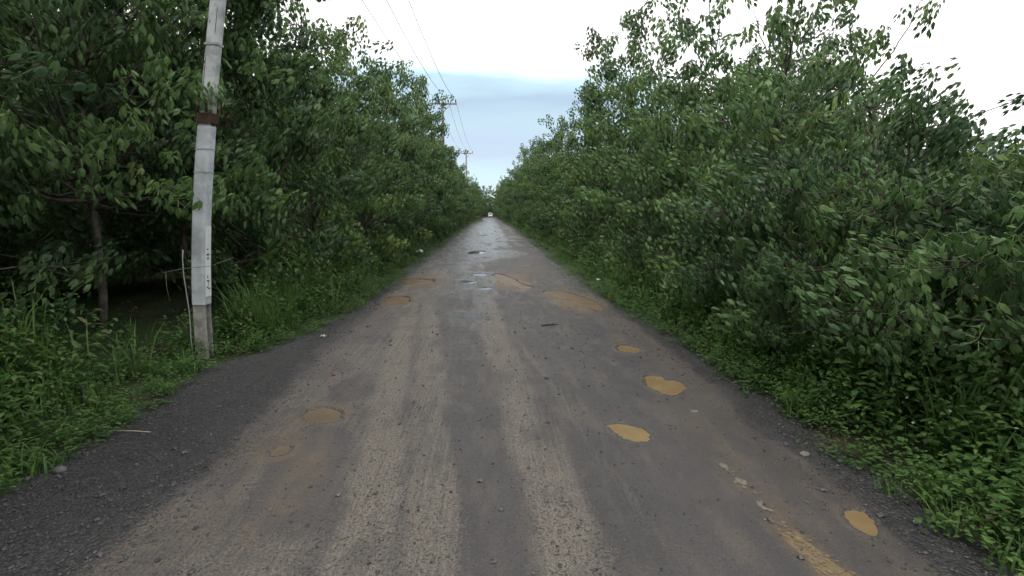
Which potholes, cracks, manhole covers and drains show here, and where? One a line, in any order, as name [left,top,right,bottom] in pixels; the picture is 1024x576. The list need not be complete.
pothole [541,290,605,312]
pothole [611,344,646,354]
pothole [381,295,413,305]
pothole [831,503,892,543]
pothole [600,420,659,446]
pothole [295,405,348,426]
